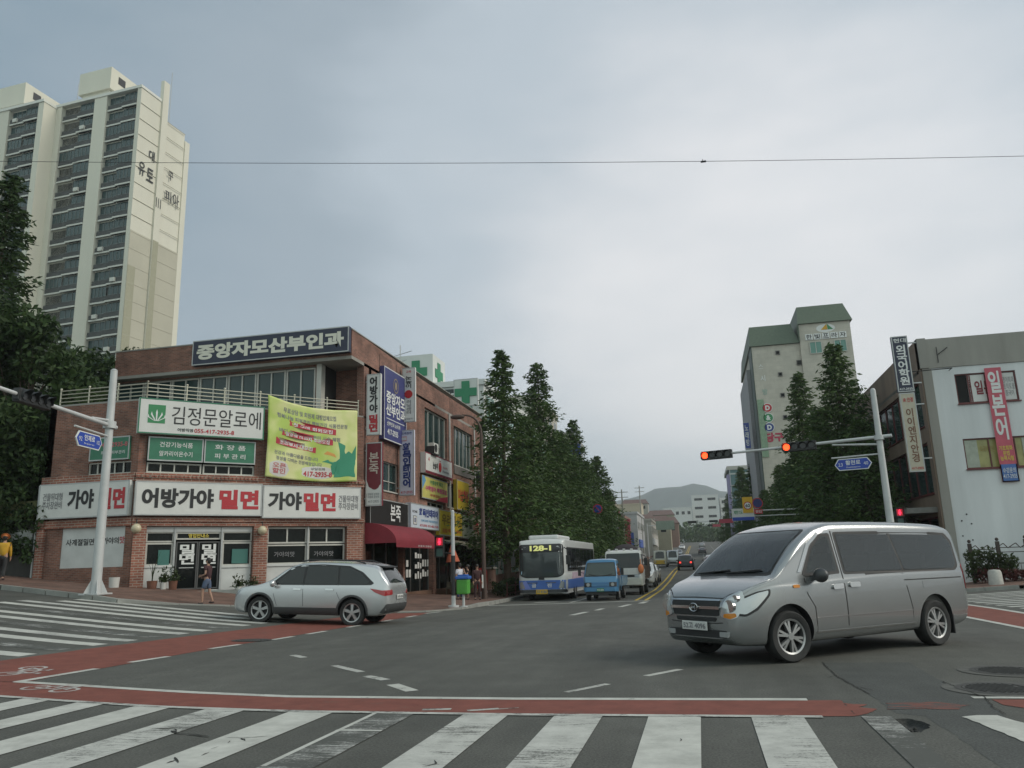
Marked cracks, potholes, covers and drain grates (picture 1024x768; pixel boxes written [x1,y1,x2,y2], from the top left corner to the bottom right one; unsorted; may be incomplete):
crack [161,728,262,763]
pothole [895,719,931,733]
crack [822,662,872,694]
manhole cover [941,681,1024,697]
manhole cover [957,665,1024,677]
